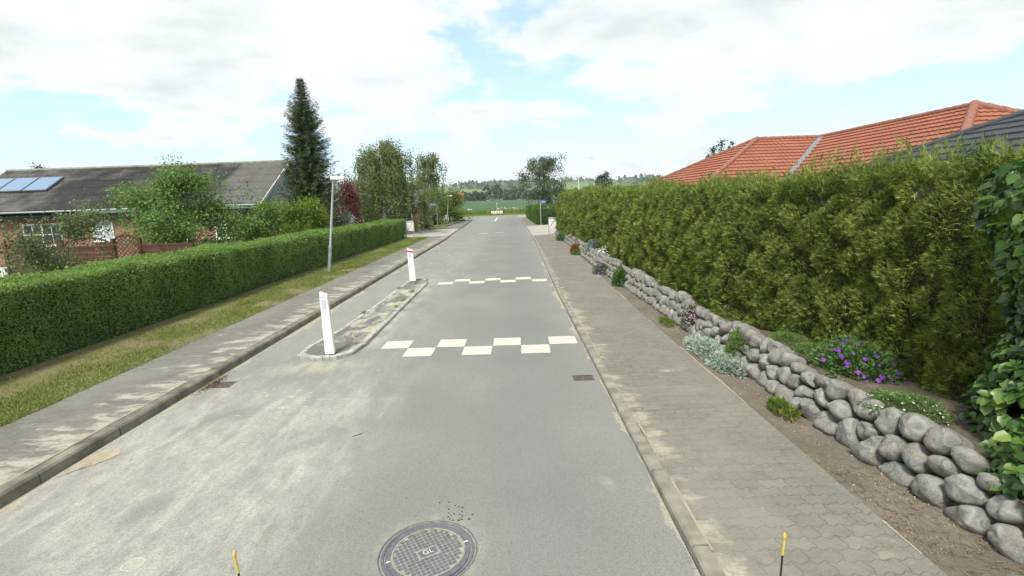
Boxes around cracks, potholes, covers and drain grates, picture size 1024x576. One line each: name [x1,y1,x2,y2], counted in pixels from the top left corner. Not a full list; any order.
manhole cover [377,520,478,576]
